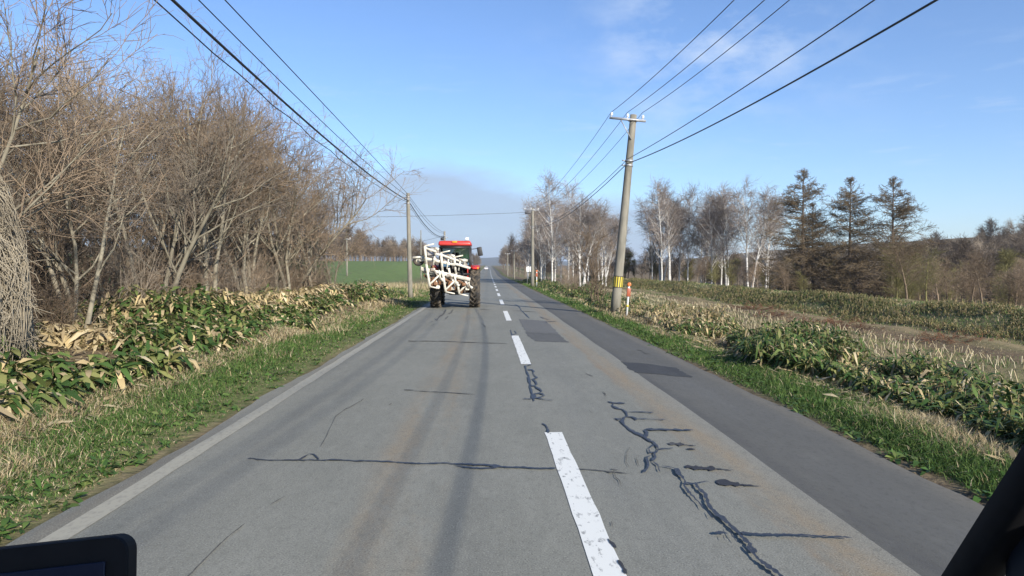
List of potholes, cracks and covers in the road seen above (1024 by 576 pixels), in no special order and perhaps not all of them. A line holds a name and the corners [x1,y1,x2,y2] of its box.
crack [587,449,639,485]
crack [248,399,555,469]
